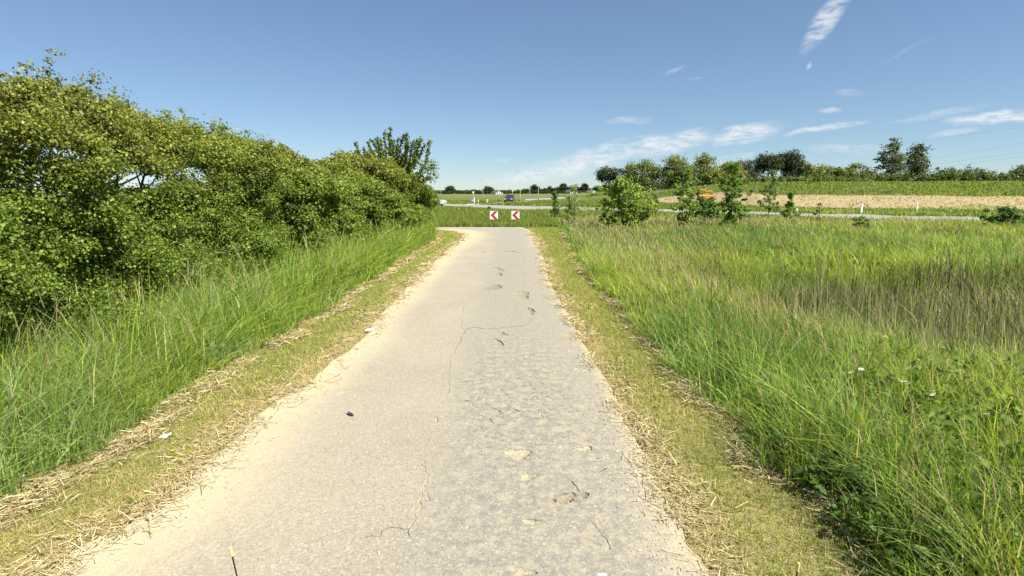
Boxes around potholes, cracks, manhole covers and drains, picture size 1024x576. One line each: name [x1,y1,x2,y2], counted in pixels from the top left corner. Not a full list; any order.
crack [362,460,435,539]
crack [447,304,583,437]
pothole [504,449,532,461]
crack [589,520,611,550]
pothole [552,492,589,506]
pothole [519,473,541,481]
